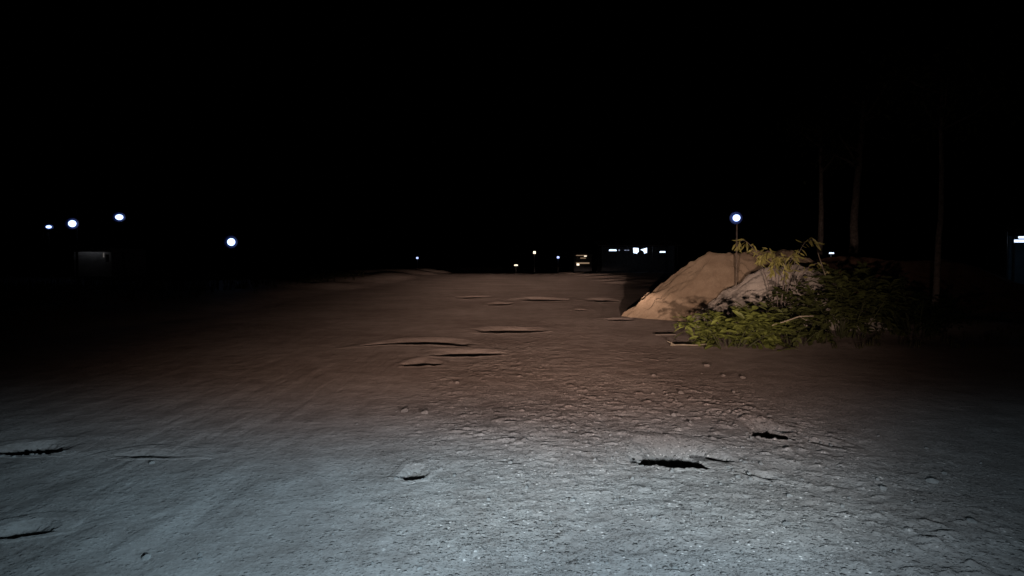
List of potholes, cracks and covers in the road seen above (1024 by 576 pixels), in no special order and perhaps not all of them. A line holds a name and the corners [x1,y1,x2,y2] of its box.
pothole [734,412,808,443]
pothole [417,347,519,358]
pothole [393,356,450,368]
pothole [459,325,563,334]
pothole [335,336,494,349]
pothole [0,436,97,458]
pothole [614,431,750,473]
crack [699,432,869,487]
pothole [0,511,83,543]
pothole [387,459,437,484]
